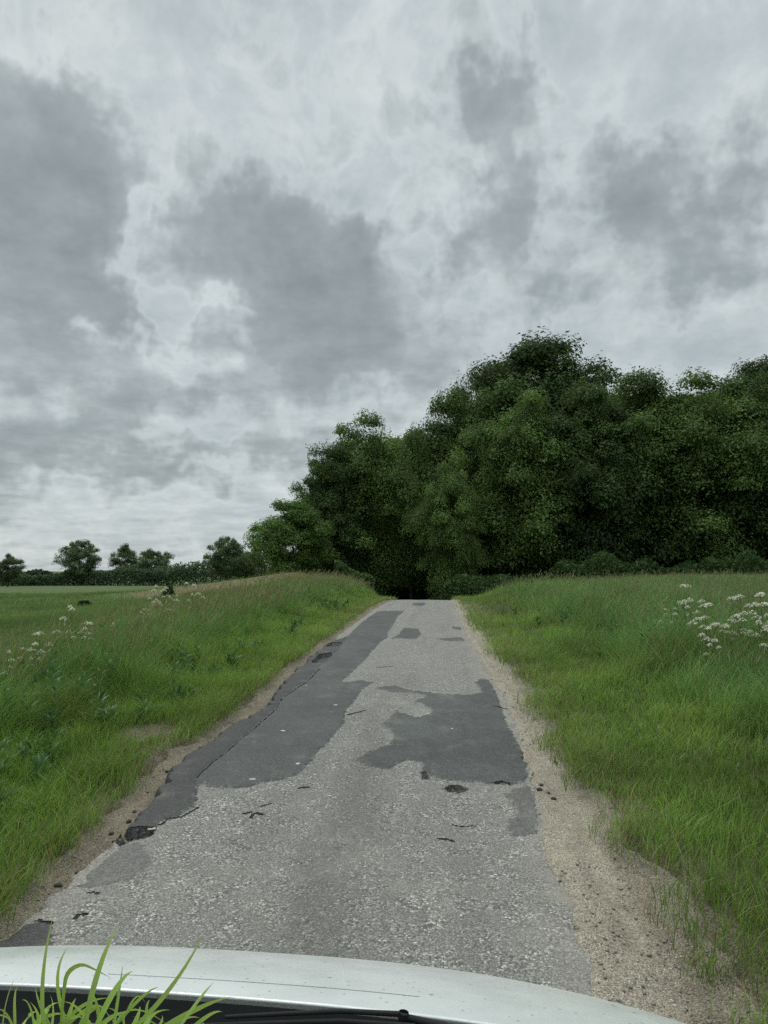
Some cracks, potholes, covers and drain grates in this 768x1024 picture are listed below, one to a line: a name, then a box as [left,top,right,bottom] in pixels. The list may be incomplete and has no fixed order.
pothole [115,827,157,847]
pothole [443,784,469,794]
crack [243,803,272,818]
